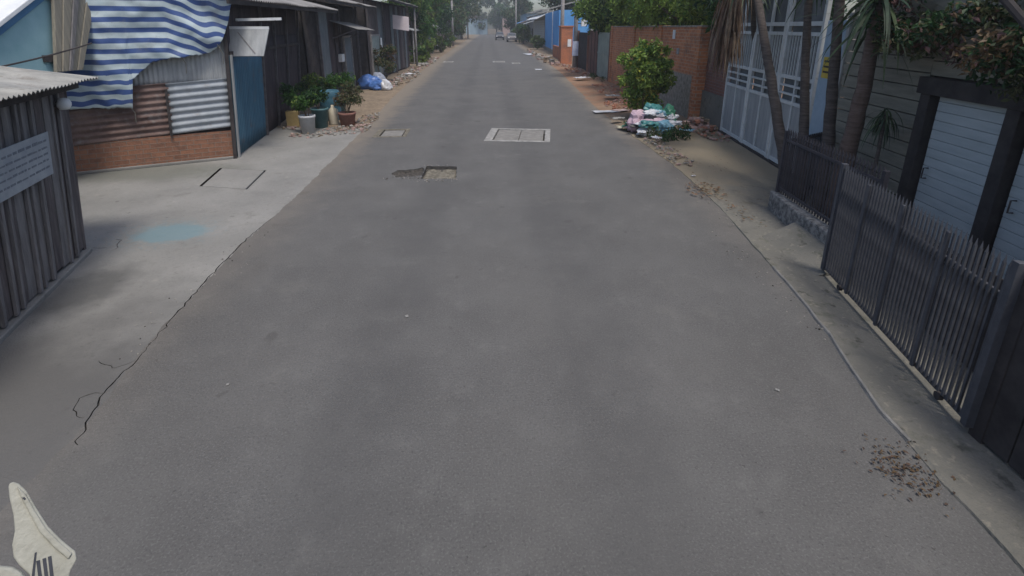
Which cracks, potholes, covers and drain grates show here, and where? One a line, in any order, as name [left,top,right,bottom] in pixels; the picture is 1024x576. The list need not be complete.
manhole cover [203,168,264,189]
pothole [392,167,425,177]
manhole cover [484,128,550,142]
manhole cover [373,129,410,137]
crack [73,219,271,445]
